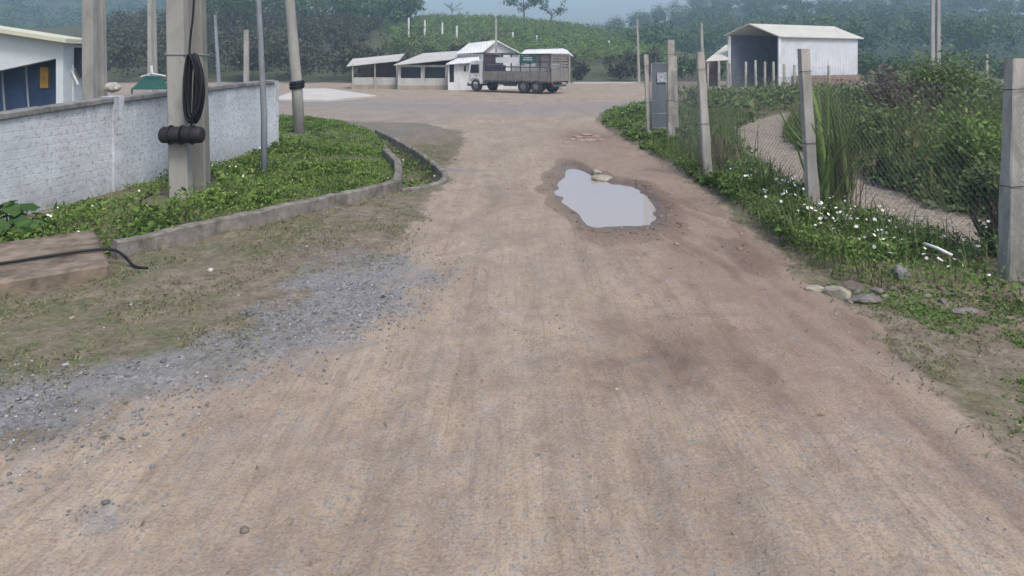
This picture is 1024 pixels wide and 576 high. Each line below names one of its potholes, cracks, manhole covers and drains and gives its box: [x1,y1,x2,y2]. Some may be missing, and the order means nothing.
pothole [534,158,691,247]
